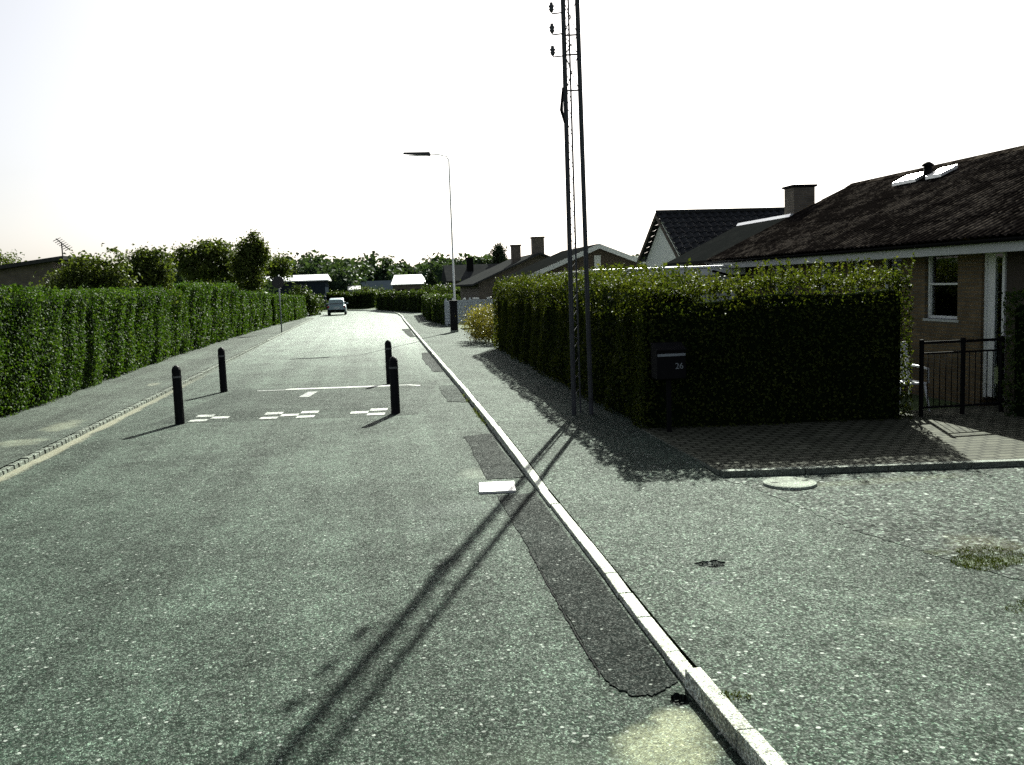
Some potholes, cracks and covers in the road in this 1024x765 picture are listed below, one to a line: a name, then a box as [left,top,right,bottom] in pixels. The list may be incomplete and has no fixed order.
pothole [694,560,726,568]
manhole cover [763,477,817,490]
pothole [670,692,692,706]
